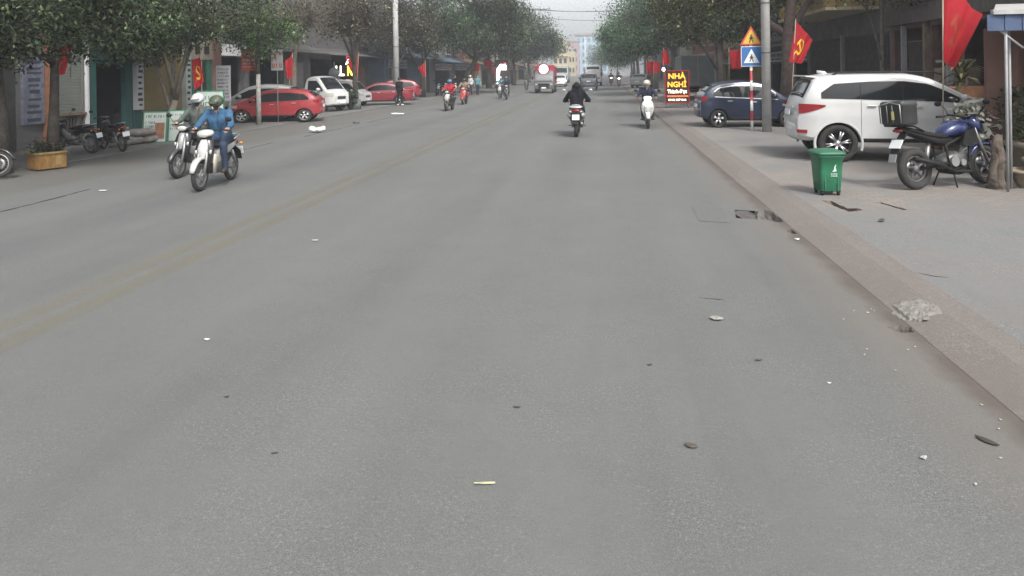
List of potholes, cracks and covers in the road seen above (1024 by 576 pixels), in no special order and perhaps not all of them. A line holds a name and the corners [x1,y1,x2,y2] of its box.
pothole [755,210,783,222]
